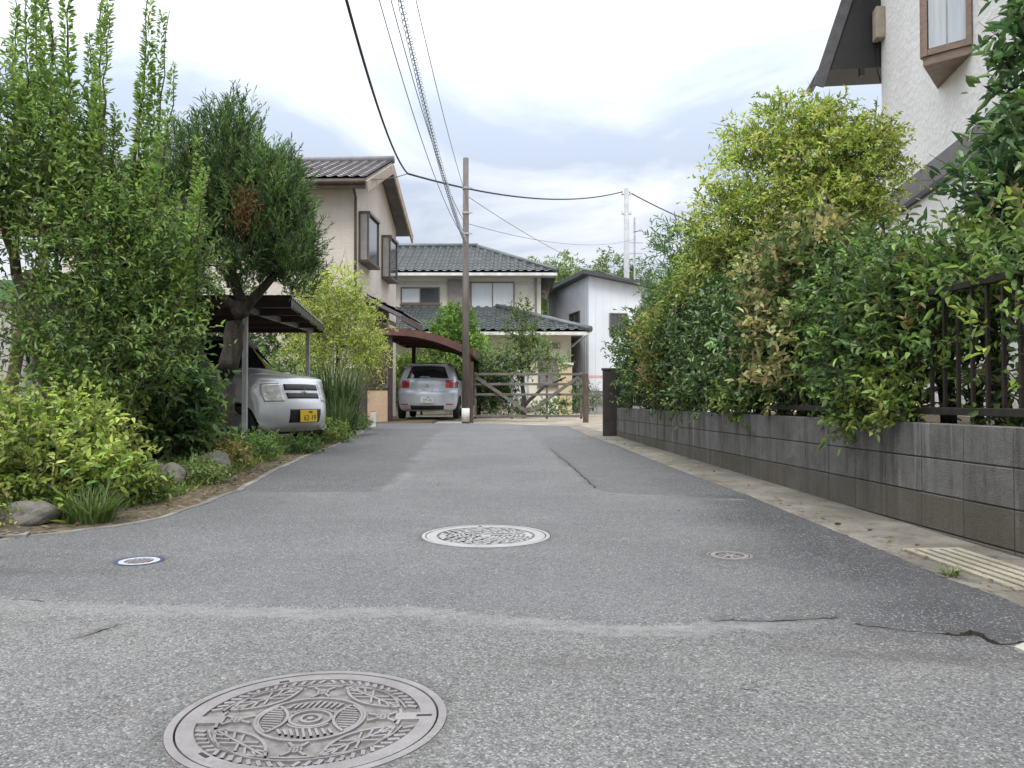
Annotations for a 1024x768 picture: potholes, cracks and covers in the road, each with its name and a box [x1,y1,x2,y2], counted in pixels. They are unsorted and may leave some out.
manhole cover [163,671,447,768]
crack [713,617,1024,645]
manhole cover [422,525,550,548]
manhole cover [706,551,753,560]
manhole cover [113,556,165,566]
drain grate [901,547,1024,593]
